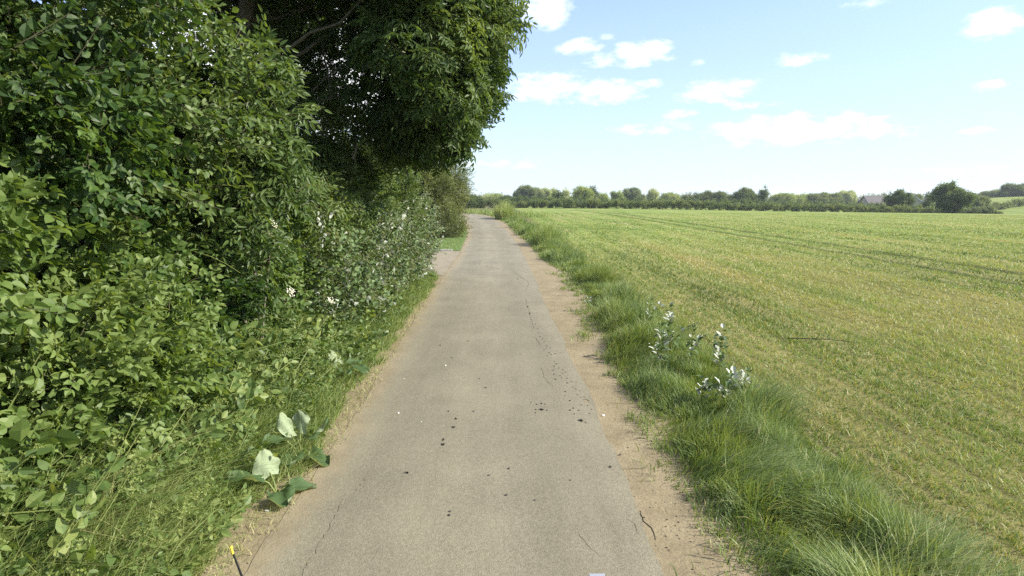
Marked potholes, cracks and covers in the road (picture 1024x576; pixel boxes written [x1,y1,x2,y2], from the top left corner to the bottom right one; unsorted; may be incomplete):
crack [515,272,590,414]
crack [302,477,365,574]
